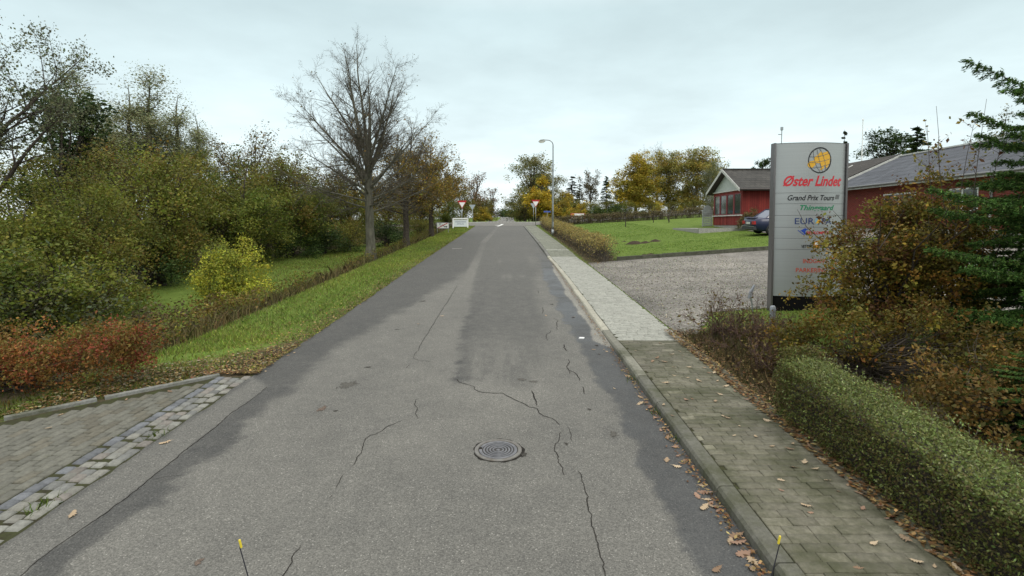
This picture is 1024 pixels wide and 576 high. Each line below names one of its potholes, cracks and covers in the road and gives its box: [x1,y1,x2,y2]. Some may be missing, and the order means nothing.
crack [457,379,606,576]
manhole cover [474,439,525,462]
